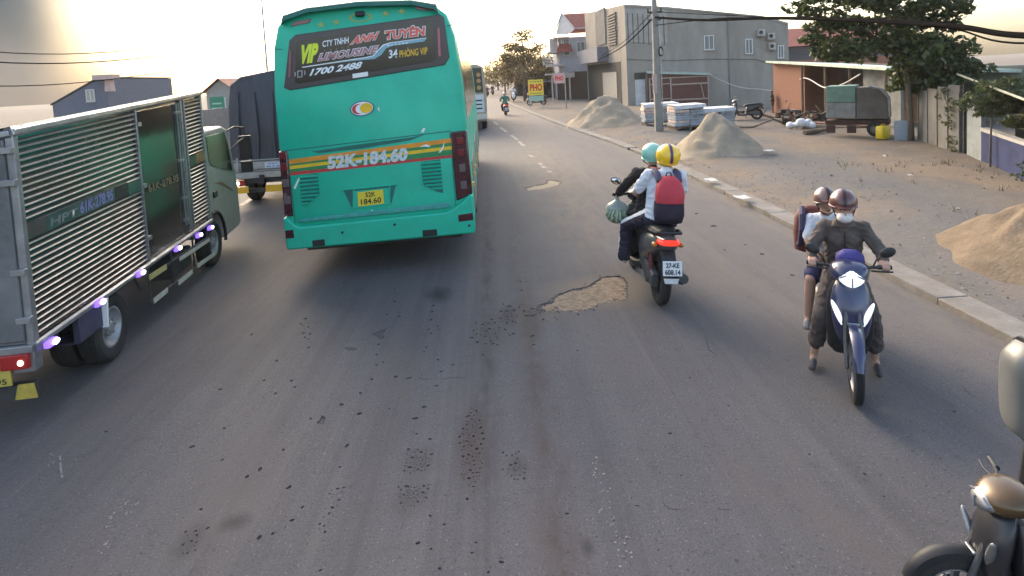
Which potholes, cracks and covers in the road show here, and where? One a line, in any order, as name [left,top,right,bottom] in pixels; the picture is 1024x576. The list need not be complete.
pothole [510,274,628,324]
pothole [525,180,561,191]
